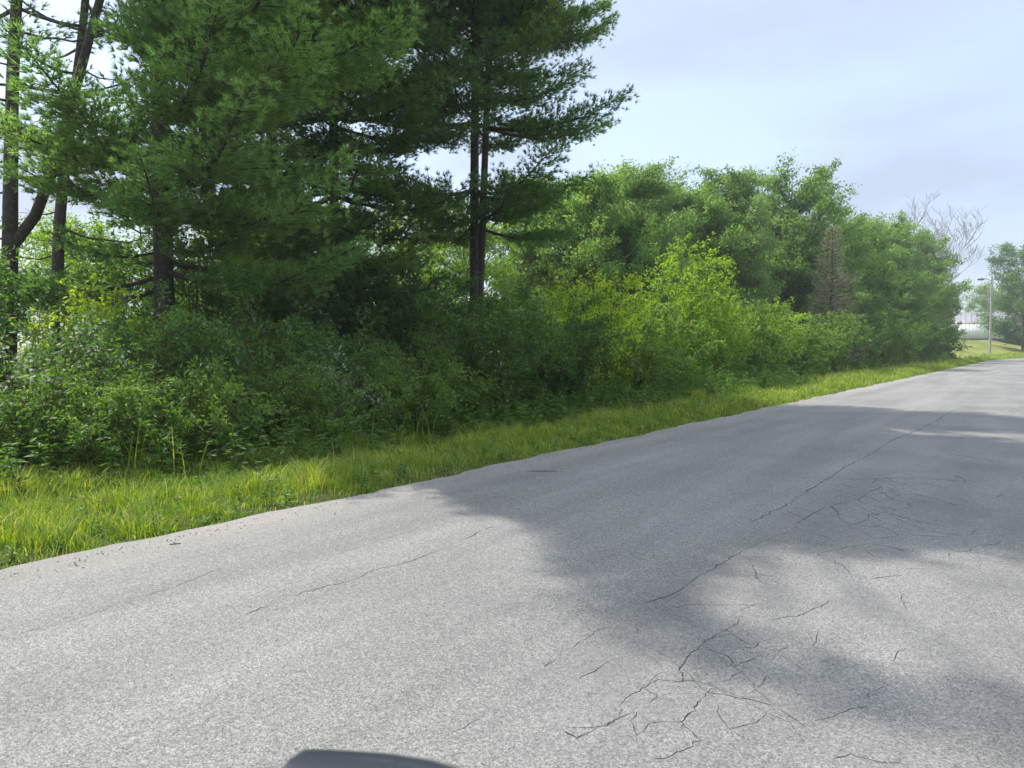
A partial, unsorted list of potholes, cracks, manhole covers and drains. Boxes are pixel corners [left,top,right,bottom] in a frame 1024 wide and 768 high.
crack [778,472,1002,608]
crack [246,526,494,615]
crack [565,603,906,767]
